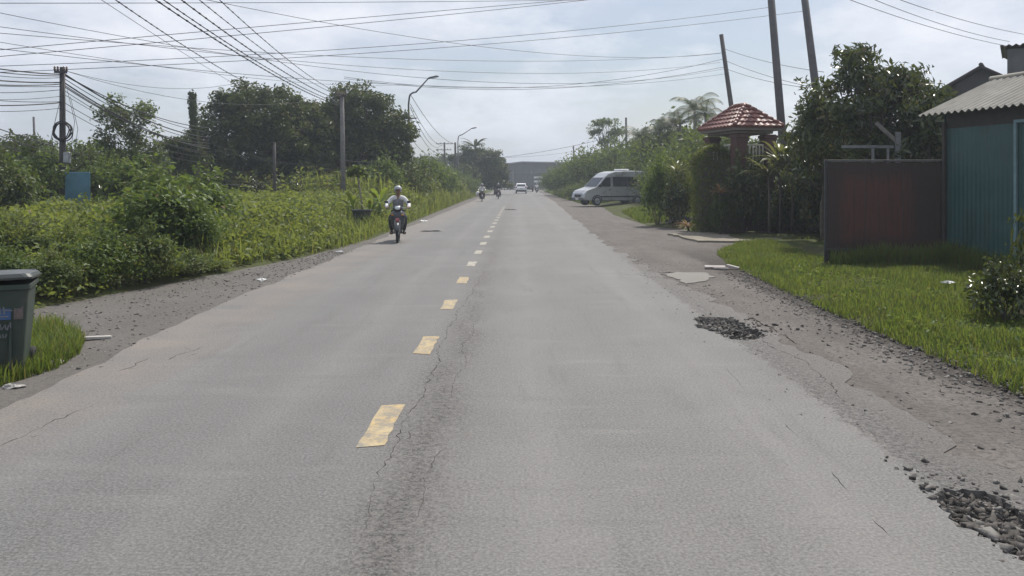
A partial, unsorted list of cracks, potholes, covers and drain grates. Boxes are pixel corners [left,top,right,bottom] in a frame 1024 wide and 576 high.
crack [340,283,479,570]
pothole [880,455,1024,561]
